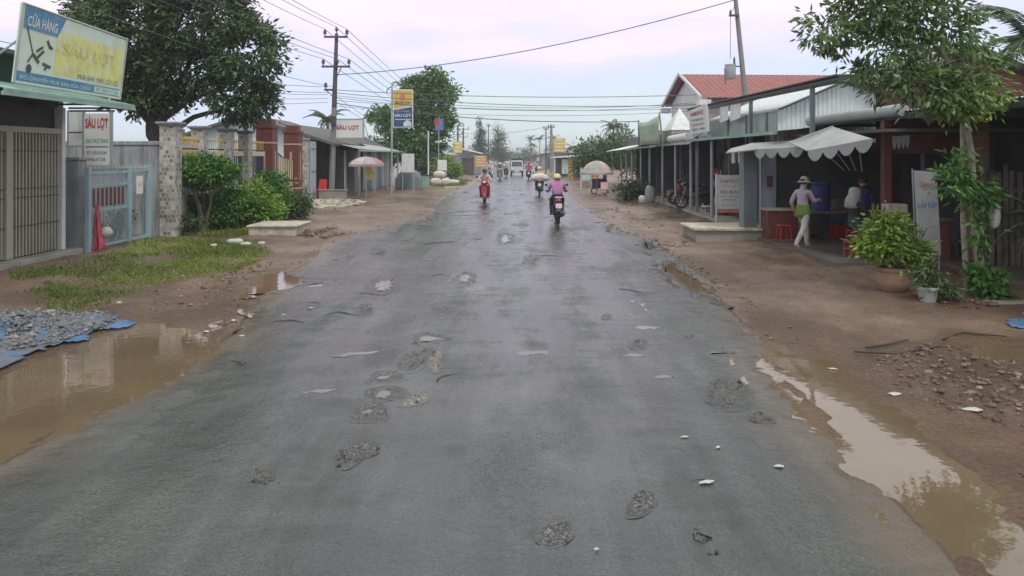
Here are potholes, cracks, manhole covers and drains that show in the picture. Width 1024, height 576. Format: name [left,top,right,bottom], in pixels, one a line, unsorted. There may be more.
pothole [361,277,405,295]
pothole [534,516,575,548]
pothole [407,331,453,345]
pothole [357,384,411,403]
pothole [749,411,777,424]
pothole [344,400,391,423]
pothole [338,440,381,459]
pothole [627,338,651,350]
pothole [624,488,660,519]
pothole [692,527,712,543]
pothole [393,344,437,374]
